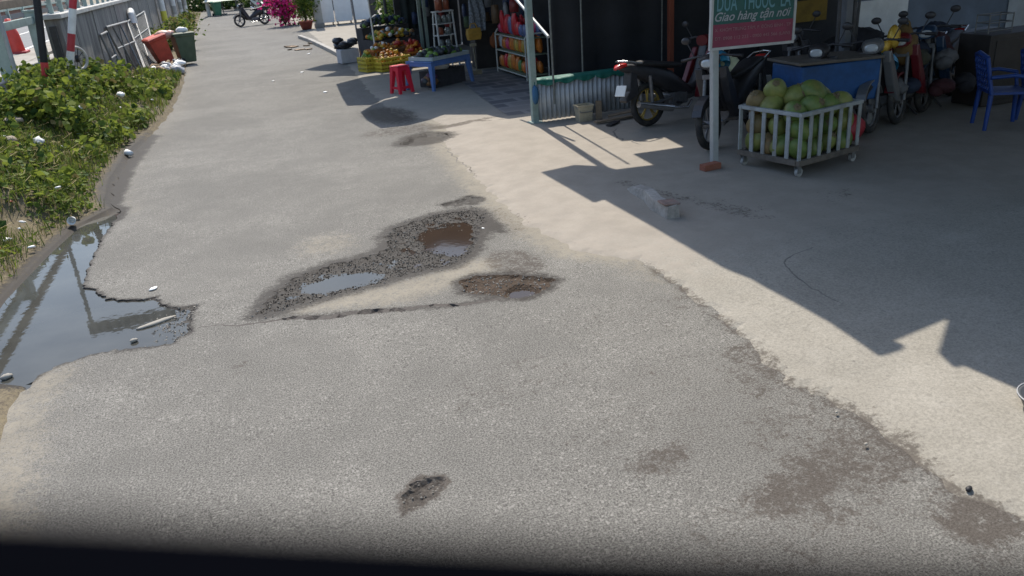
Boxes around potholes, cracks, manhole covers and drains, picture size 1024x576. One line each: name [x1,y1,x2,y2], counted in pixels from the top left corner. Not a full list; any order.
pothole [250,206,491,321]
pothole [401,476,446,510]
pothole [441,195,484,206]
pothole [27,211,198,385]
pothole [399,133,448,145]
crack [783,247,838,302]
pothole [458,274,556,298]
